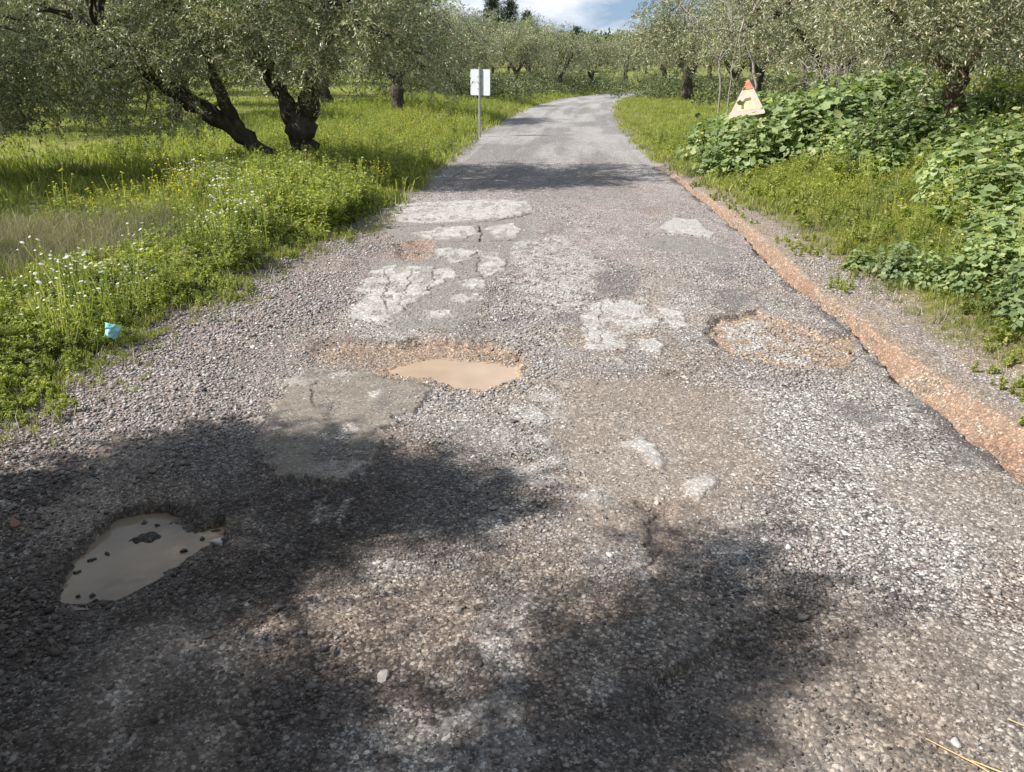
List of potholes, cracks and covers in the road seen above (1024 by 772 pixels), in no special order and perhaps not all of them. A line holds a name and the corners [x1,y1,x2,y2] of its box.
pothole [701,307,863,370]
crack [352,213,535,311]
pothole [297,335,537,396]
pothole [35,497,244,626]
pothole [391,238,439,262]
